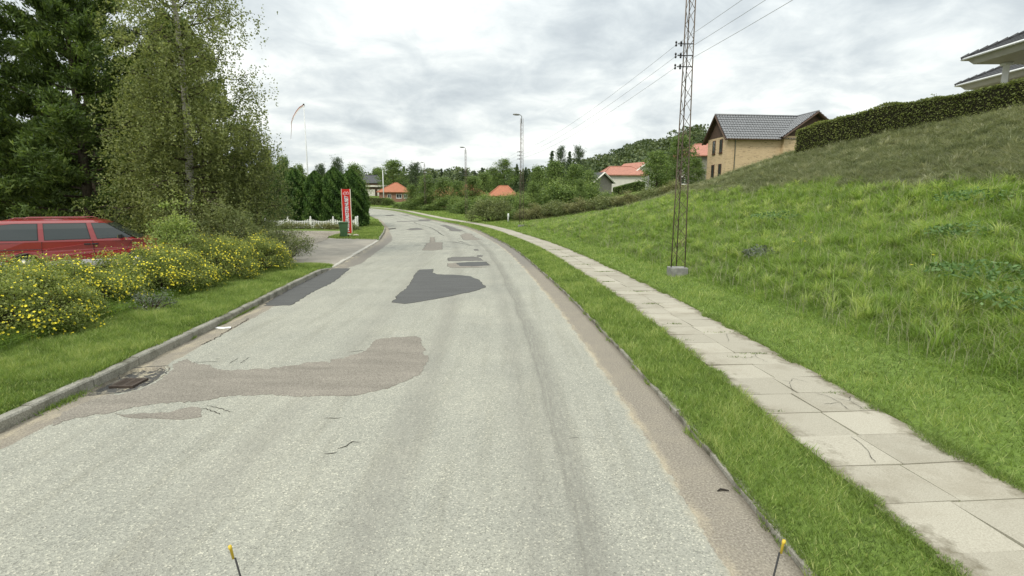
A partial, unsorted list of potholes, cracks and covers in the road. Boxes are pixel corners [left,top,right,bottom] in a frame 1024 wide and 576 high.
drain grate [81,365,170,396]
